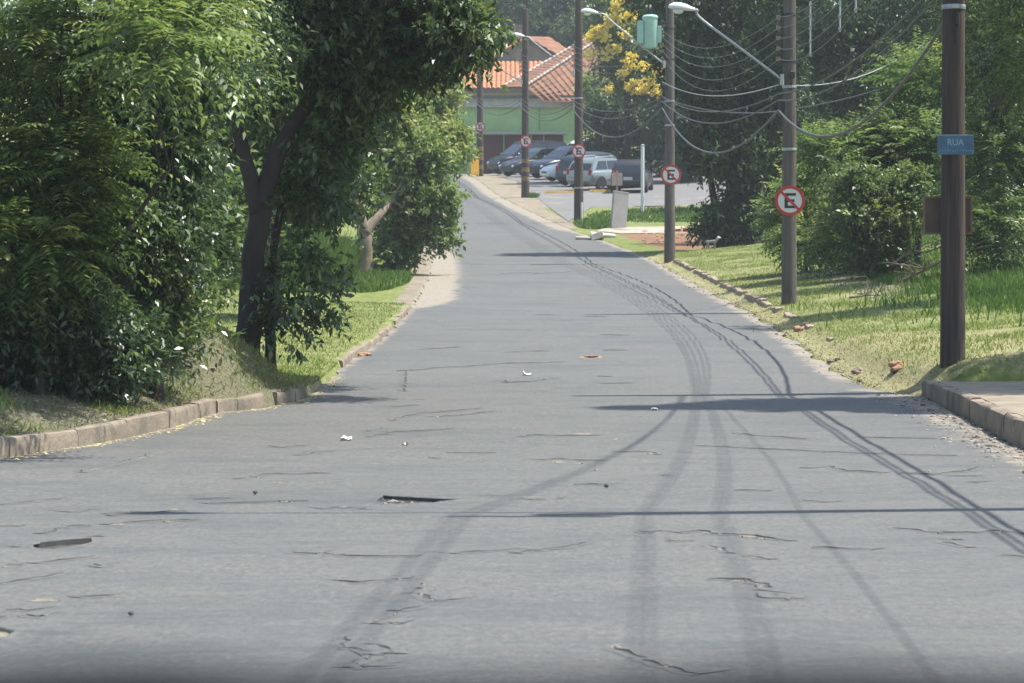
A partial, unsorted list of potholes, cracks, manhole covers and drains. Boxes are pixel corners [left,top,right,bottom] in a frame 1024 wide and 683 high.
pothole [25,537,102,550]
crack [811,527,1024,550]
crack [602,644,692,670]
crack [284,542,590,557]
crack [632,528,807,600]
crack [329,575,473,669]
pothole [0,627,28,640]
crack [365,346,565,458]
crack [694,433,989,503]
crack [0,472,368,618]
pothole [367,495,469,505]
